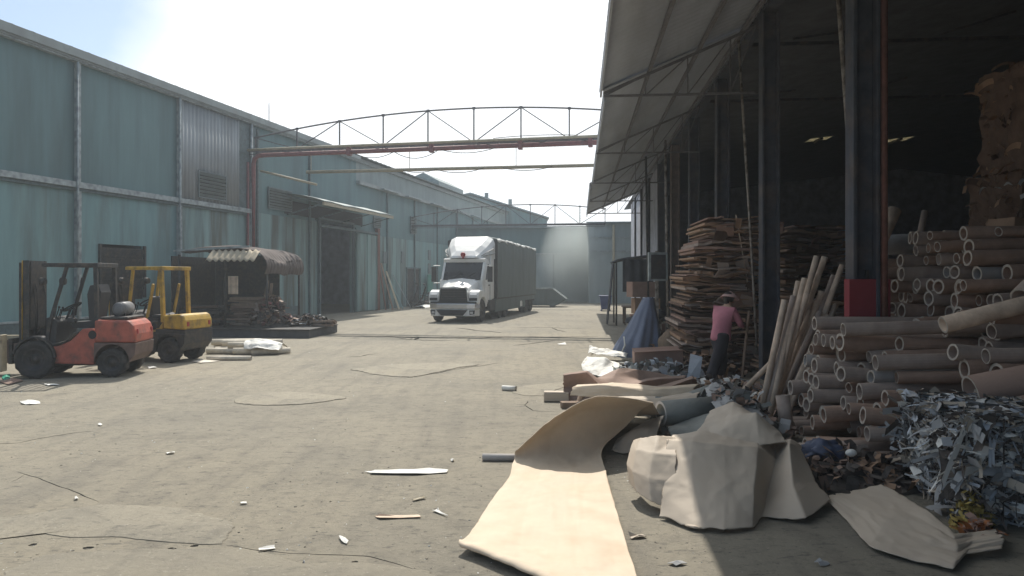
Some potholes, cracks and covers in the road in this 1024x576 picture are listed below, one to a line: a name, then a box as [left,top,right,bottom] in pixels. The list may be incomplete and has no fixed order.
crack [228,545,412,569]
crack [14,472,96,501]
